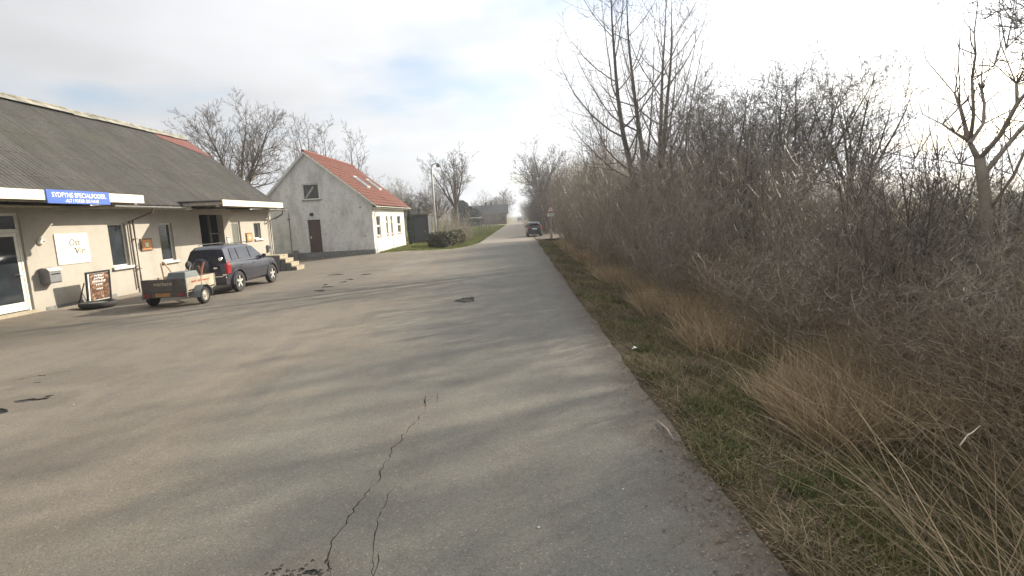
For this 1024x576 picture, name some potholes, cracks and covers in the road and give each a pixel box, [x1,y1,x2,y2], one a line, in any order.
pothole [264,559,332,576]
crack [327,397,438,576]
